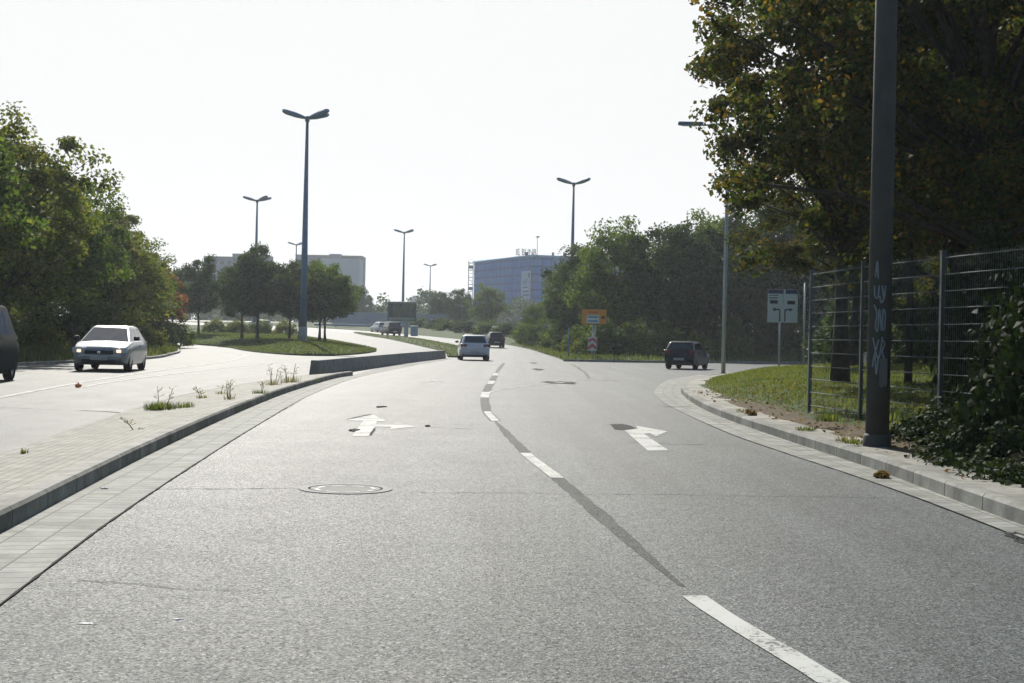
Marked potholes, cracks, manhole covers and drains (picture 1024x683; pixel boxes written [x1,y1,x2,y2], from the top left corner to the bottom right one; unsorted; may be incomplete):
manhole cover [298,483,392,494]
